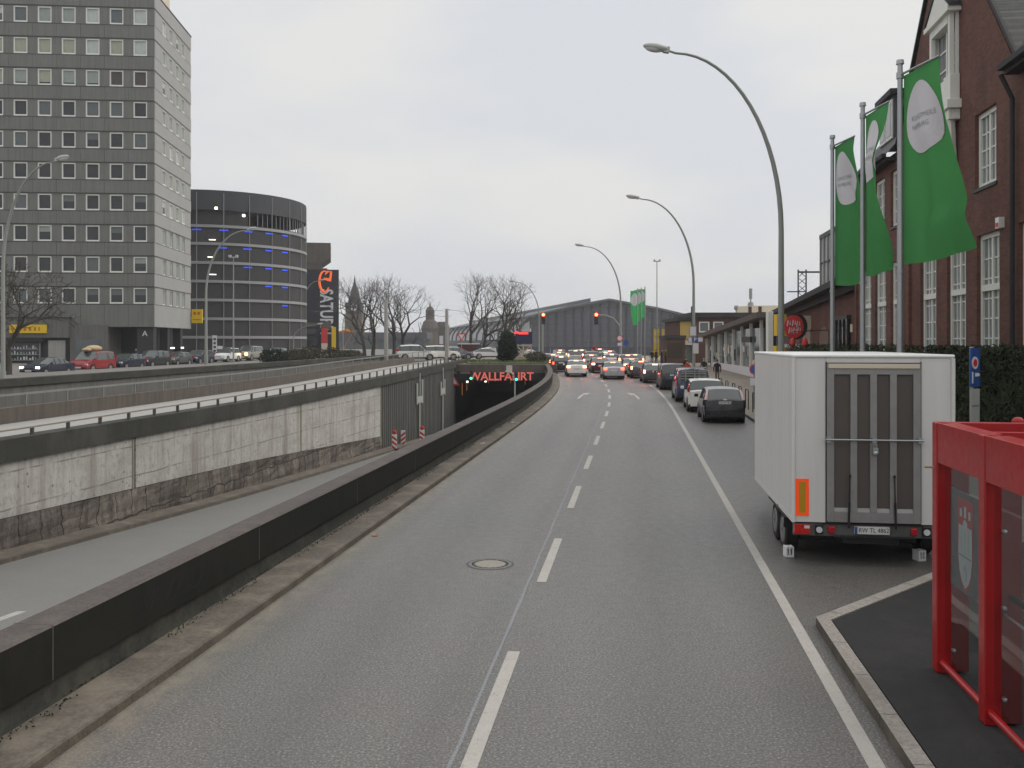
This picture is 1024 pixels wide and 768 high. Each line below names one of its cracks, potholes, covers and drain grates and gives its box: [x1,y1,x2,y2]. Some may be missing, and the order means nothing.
manhole cover [466,558,514,570]
